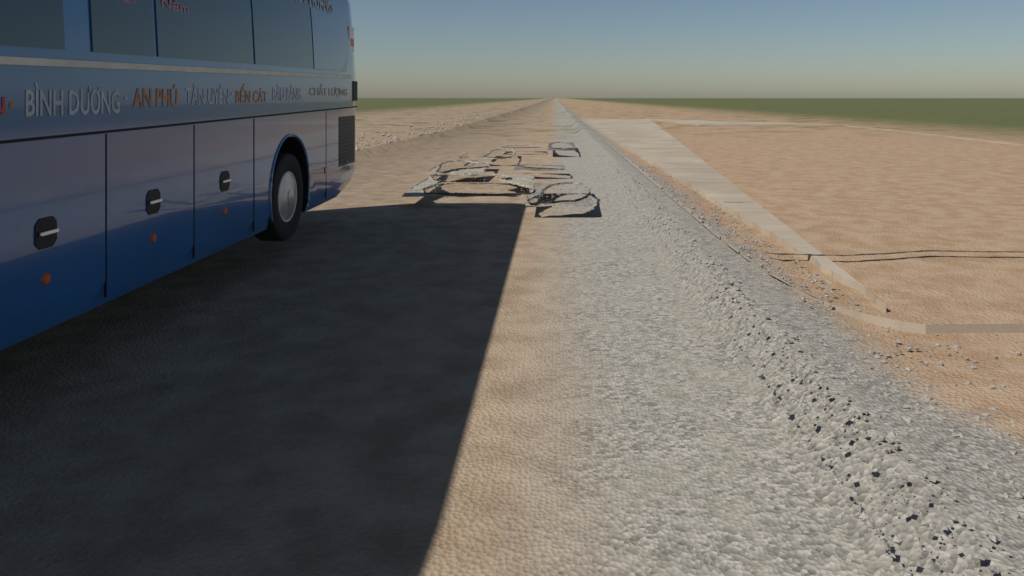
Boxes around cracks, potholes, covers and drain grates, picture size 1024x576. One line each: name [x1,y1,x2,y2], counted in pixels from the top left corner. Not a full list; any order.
pothole [481,149,516,159]
pothole [426,160,492,173]
pothole [524,182,593,207]
pothole [548,142,576,151]
pothole [402,173,537,197]
